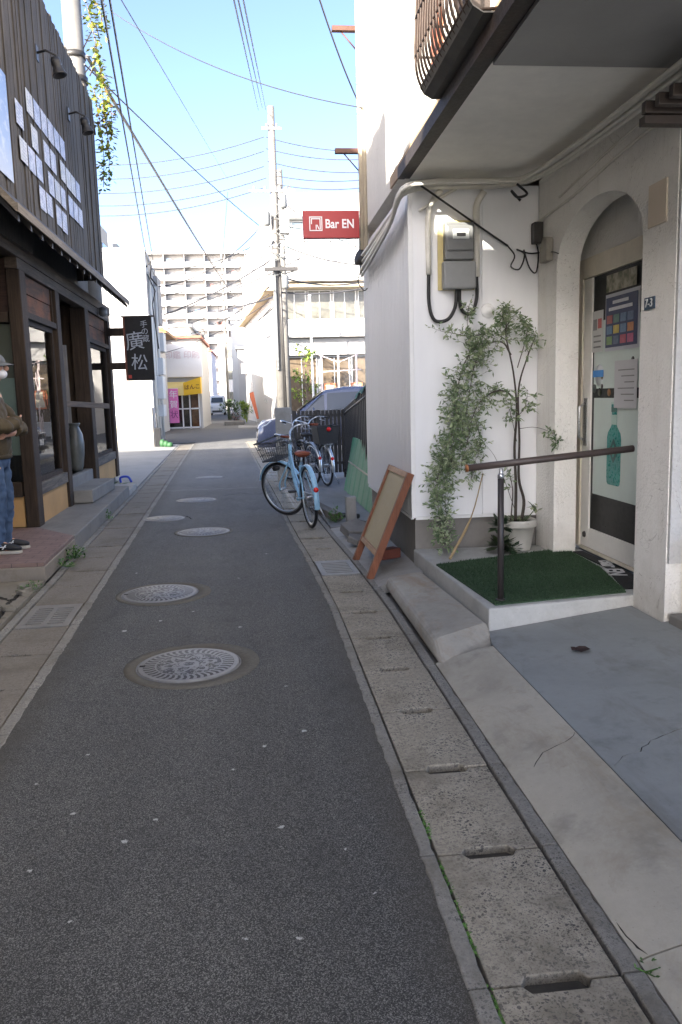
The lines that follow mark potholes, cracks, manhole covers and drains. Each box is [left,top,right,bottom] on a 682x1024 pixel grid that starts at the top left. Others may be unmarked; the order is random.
manhole cover [123,643,260,690]
manhole cover [174,527,233,537]
drain grate [314,560,361,578]
drain grate [14,603,83,629]
manhole cover [116,582,211,606]
